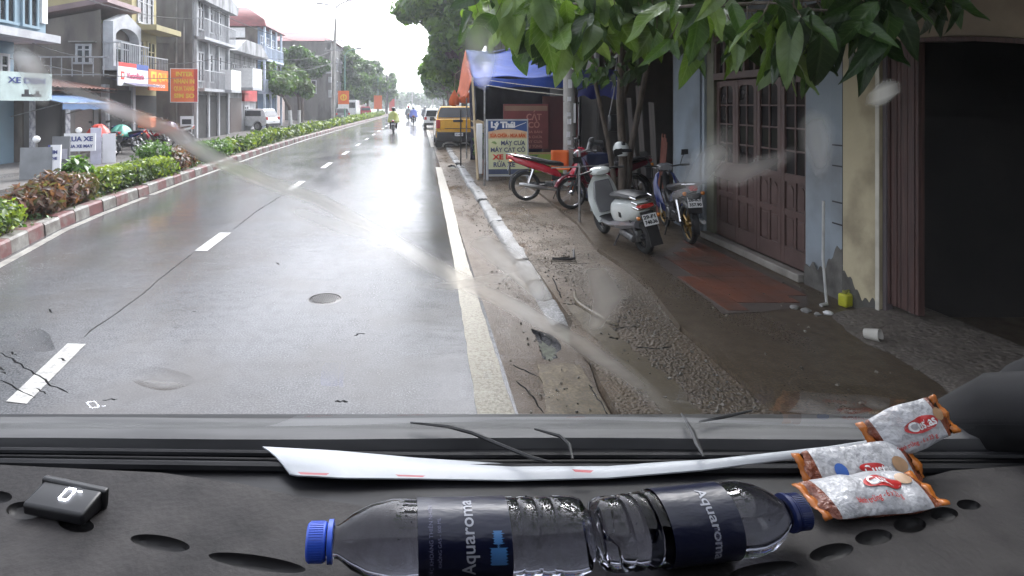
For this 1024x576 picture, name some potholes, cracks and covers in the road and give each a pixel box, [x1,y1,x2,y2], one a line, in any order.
crack [0,352,68,398]
crack [513,365,544,413]
pothole [531,329,561,360]
pothole [14,328,54,352]
pothole [129,367,194,390]
manhole cover [307,293,343,305]
